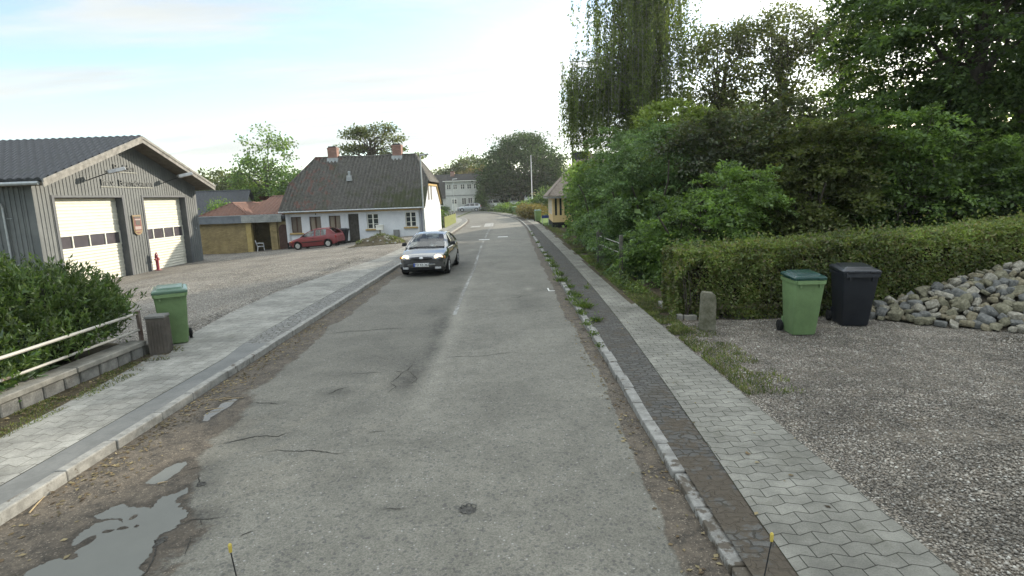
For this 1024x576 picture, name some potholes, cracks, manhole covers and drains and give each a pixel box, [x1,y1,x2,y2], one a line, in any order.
pothole [458,503,477,514]
crack [212,431,345,454]
